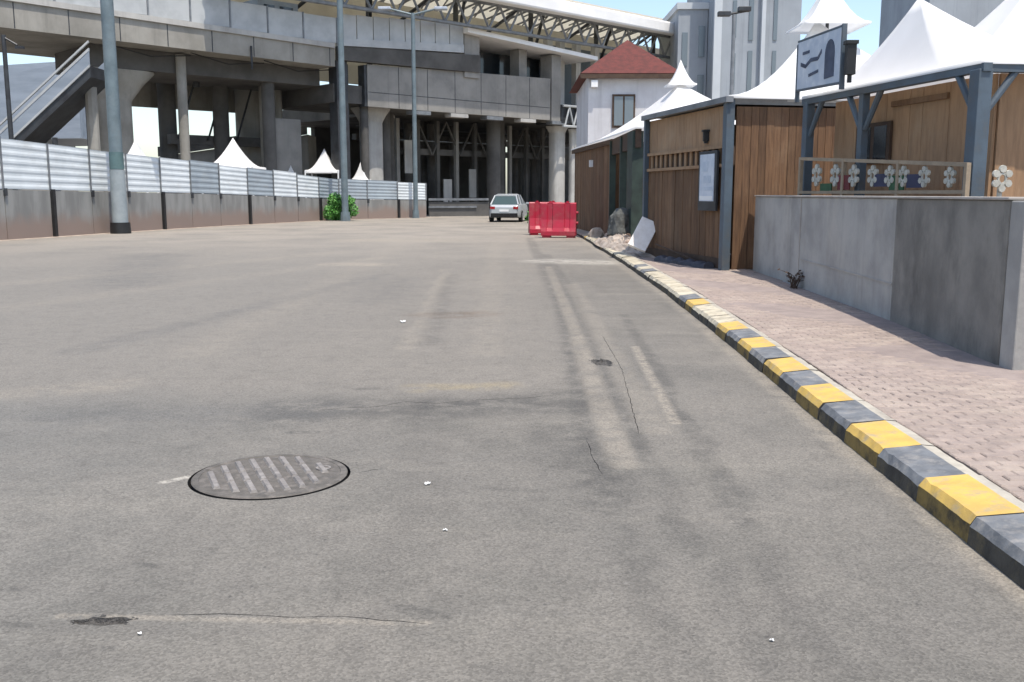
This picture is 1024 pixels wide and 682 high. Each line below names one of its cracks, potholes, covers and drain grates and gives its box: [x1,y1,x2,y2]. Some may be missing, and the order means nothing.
pothole [70,614,139,626]
pothole [589,358,613,366]
manhole cover [187,454,351,500]
crack [186,613,431,625]
crack [602,336,639,433]
